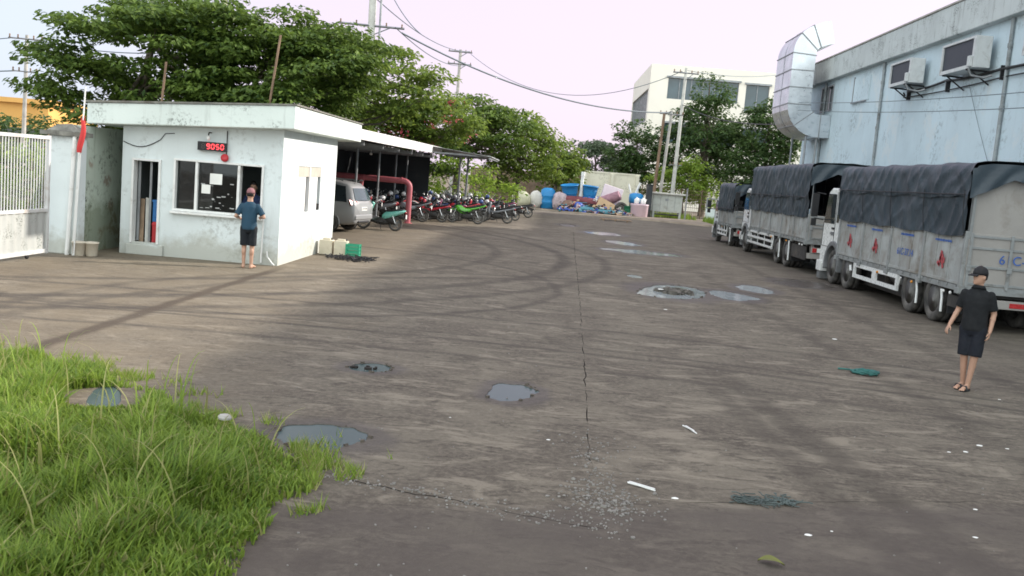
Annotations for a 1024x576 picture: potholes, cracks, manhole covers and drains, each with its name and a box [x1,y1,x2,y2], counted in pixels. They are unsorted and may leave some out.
crack [329,473,604,529]
pothole [485,383,540,401]
crack [573,232,593,477]
pothole [345,361,394,373]
pothole [274,423,373,450]
